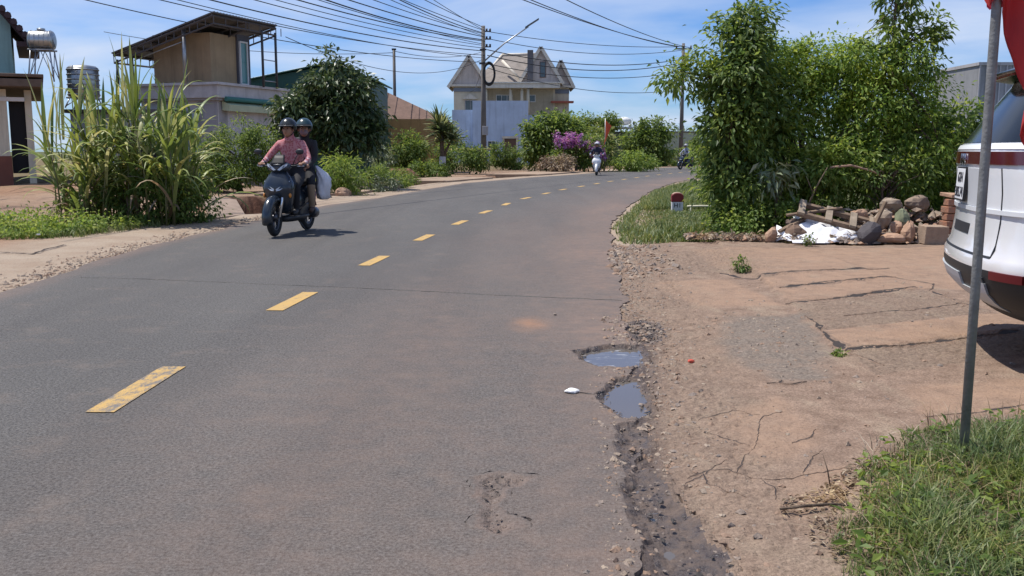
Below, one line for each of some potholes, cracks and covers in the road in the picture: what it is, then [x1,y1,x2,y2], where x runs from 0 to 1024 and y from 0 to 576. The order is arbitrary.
pothole [606,420,742,576]
pothole [465,470,544,540]
pothole [590,375,659,422]
crack [685,410,842,499]
pothole [565,343,654,371]
